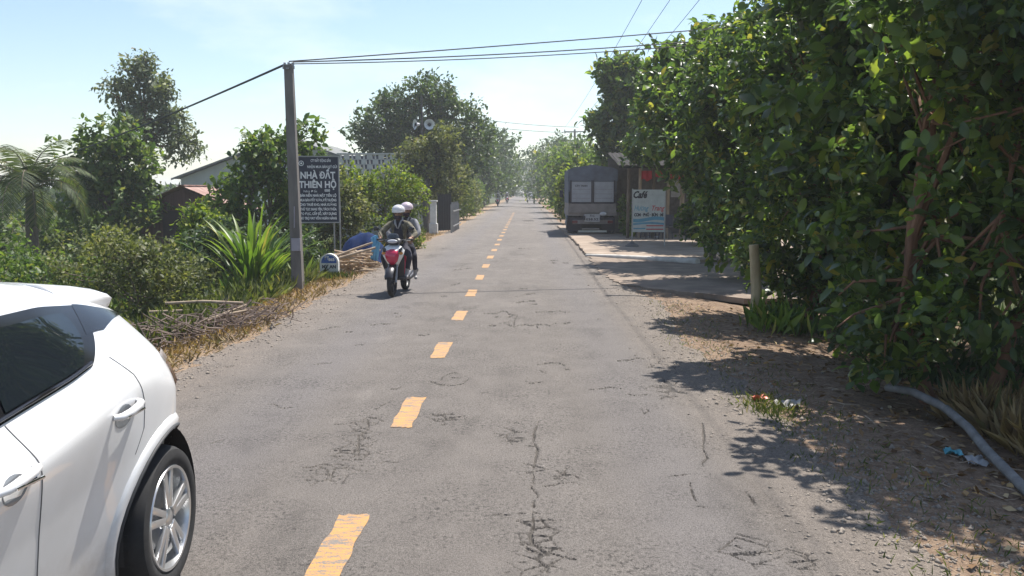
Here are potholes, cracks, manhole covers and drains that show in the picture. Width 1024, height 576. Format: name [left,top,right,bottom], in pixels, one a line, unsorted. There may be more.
crack [484,288,569,329]
crack [669,423,709,508]
crack [427,412,467,426]
crack [718,493,819,574]
crack [302,388,398,486]
crack [494,421,580,576]
